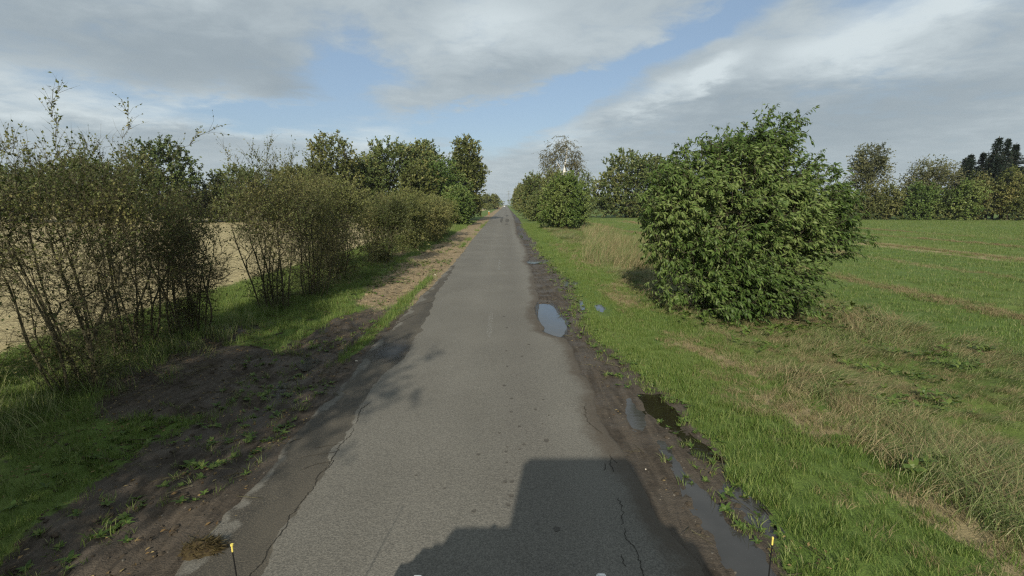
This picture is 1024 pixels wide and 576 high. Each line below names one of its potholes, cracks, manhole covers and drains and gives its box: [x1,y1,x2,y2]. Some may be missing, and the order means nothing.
crack [617,499,644,576]
crack [249,433,351,576]
pothole [535,302,570,337]
